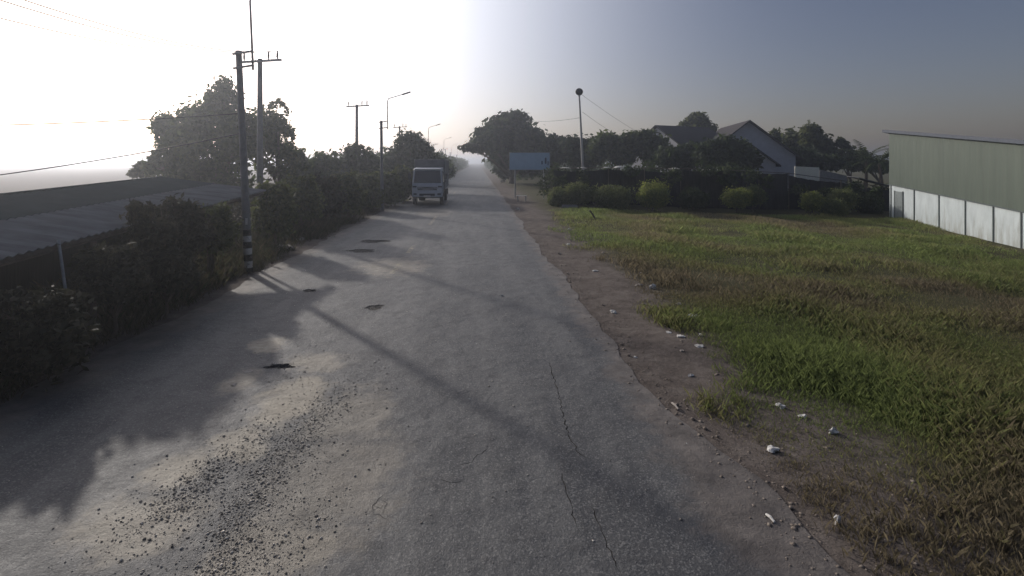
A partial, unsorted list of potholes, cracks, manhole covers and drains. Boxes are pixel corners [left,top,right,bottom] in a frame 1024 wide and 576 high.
crack [550,366,622,575]
